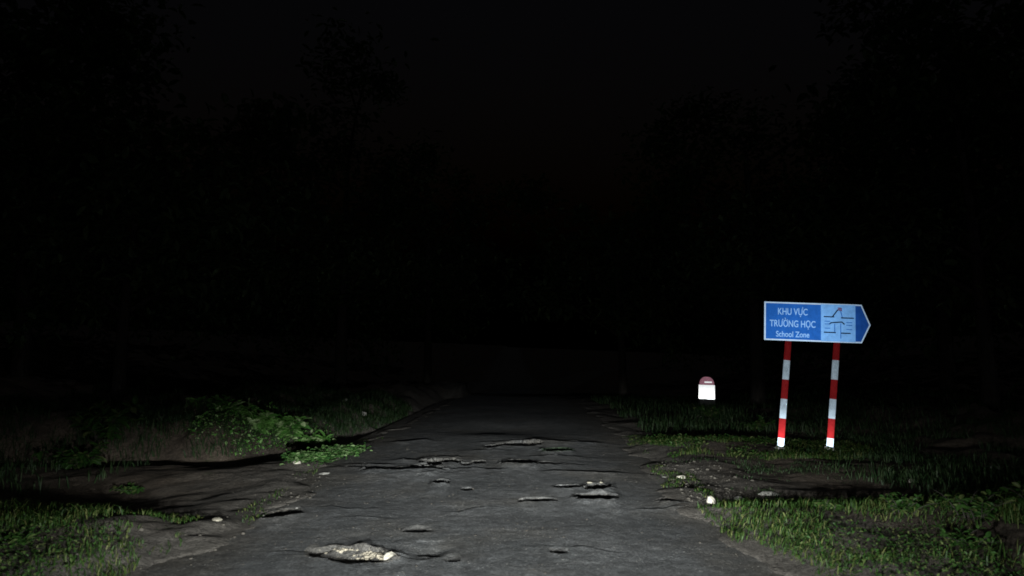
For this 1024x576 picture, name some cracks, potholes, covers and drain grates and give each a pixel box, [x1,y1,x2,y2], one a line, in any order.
pothole [299,542,400,564]
pothole [399,525,435,533]
pothole [582,482,614,490]
pothole [259,506,307,519]
pothole [417,457,466,466]
pothole [496,439,545,447]
pothole [572,489,620,500]
